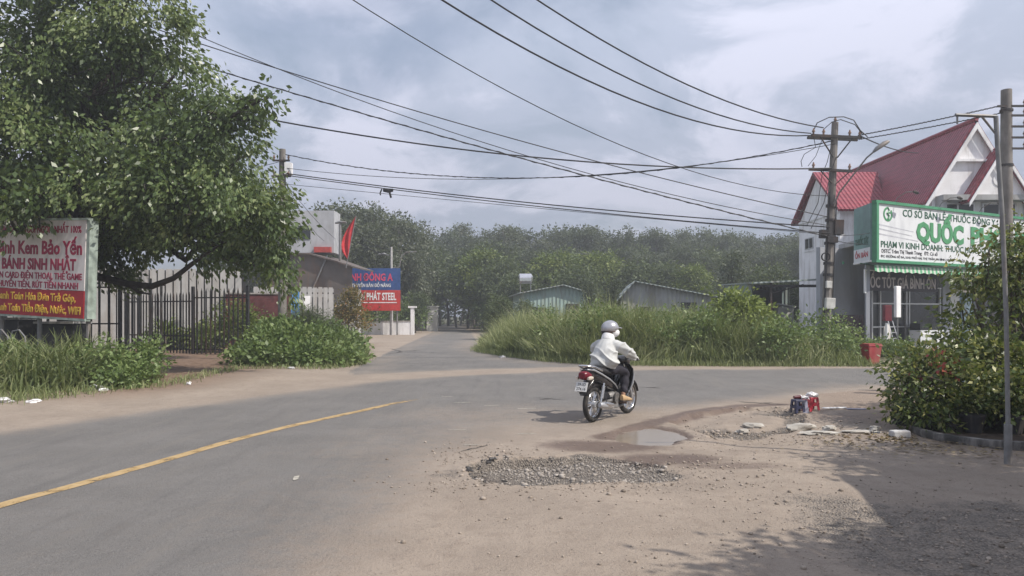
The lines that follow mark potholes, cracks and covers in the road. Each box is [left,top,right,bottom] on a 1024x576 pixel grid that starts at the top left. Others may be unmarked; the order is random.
pothole [465,454,683,486]
pothole [604,424,699,446]
